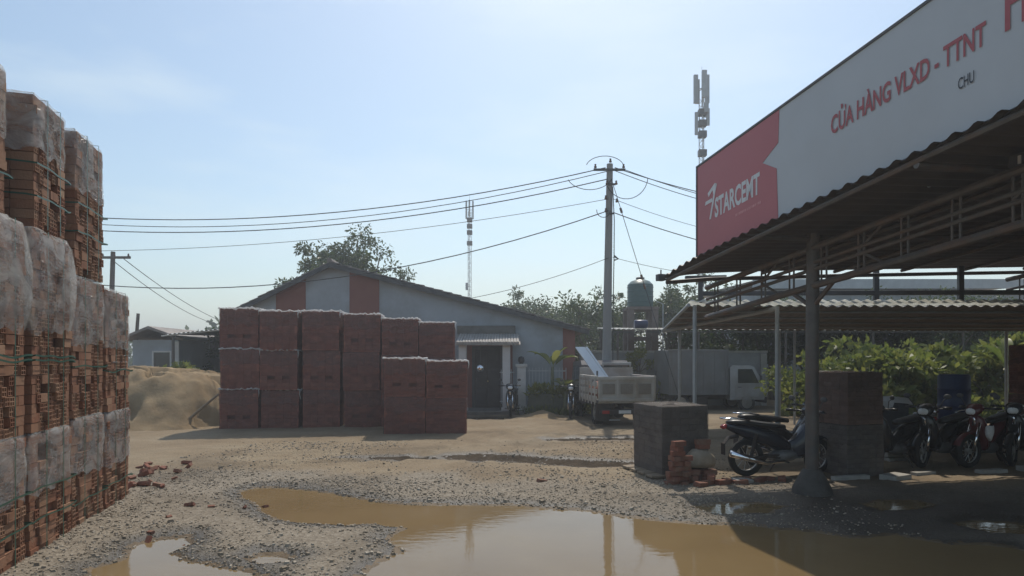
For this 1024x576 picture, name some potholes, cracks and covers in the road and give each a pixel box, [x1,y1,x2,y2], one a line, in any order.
pothole [236,486,1024,576]
